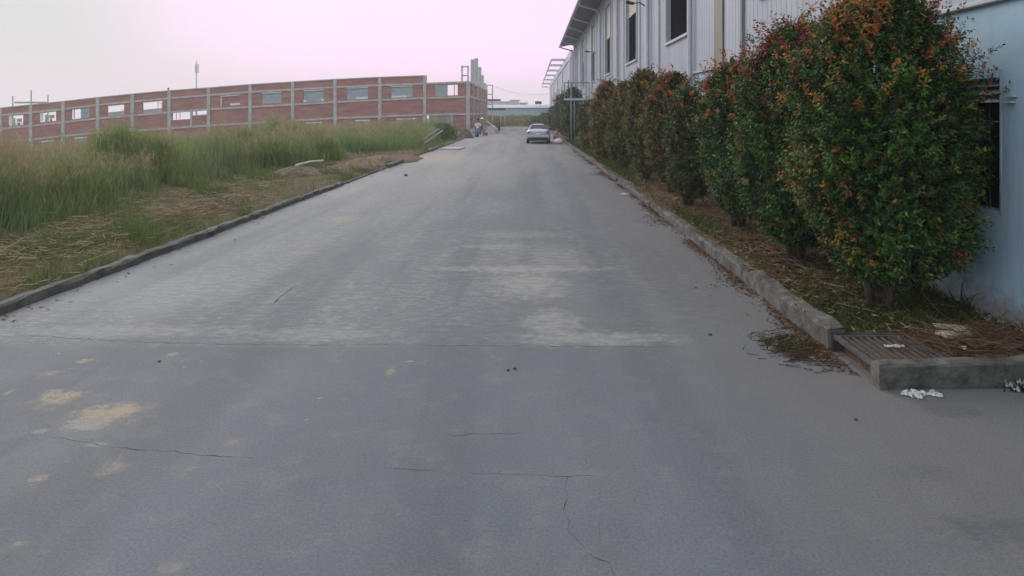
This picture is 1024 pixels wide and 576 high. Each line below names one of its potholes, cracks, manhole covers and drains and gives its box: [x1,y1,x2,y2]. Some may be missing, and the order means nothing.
crack [474,462,613,571]
crack [53,437,249,458]
drain grate [831,332,945,366]
